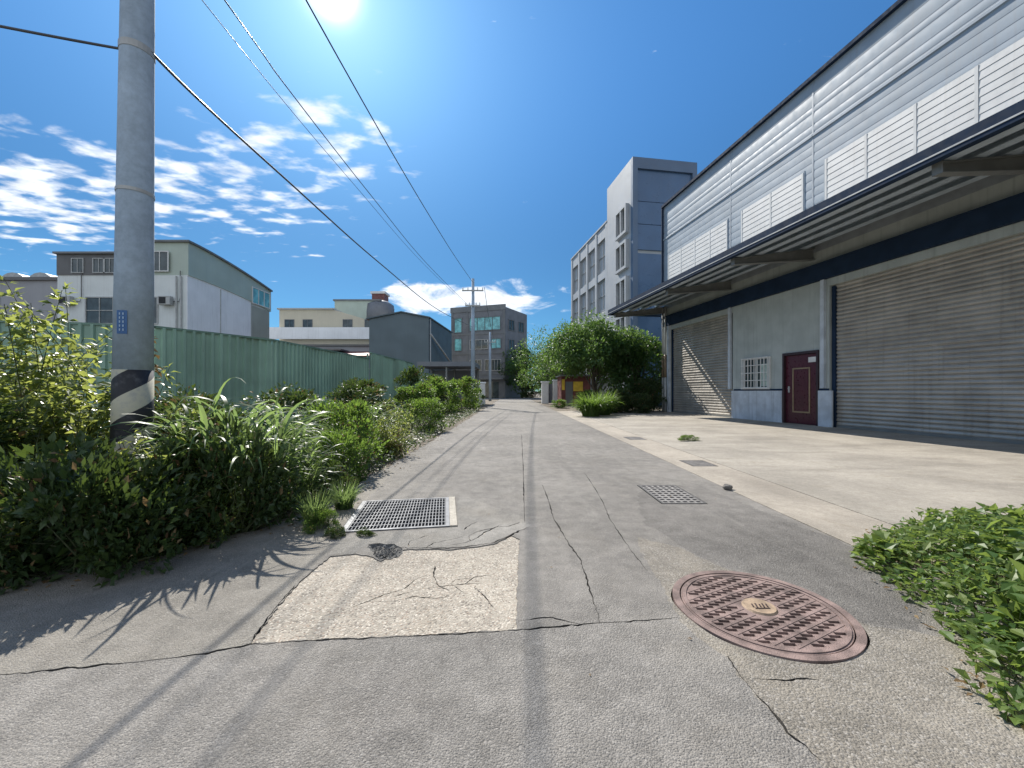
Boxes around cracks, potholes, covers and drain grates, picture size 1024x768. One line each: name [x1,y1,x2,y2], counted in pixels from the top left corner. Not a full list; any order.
manhole cover [672,570,867,664]
crack [4,485,671,675]
pothole [367,544,403,560]
drain grate [340,497,457,533]
